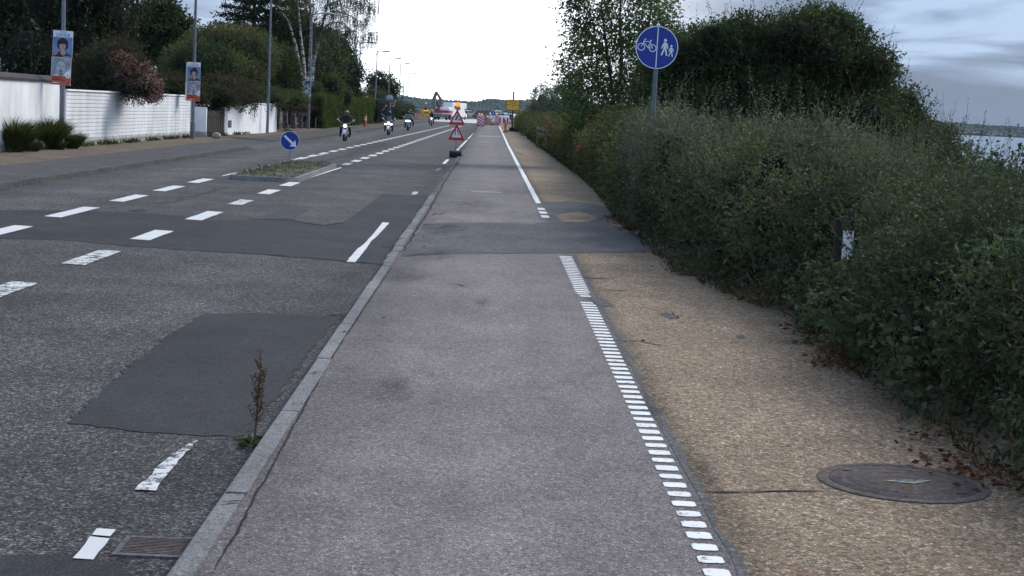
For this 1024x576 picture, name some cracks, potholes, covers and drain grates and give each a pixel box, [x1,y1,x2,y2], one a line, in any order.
drain grate [111,535,192,559]
manhole cover [817,463,991,503]
